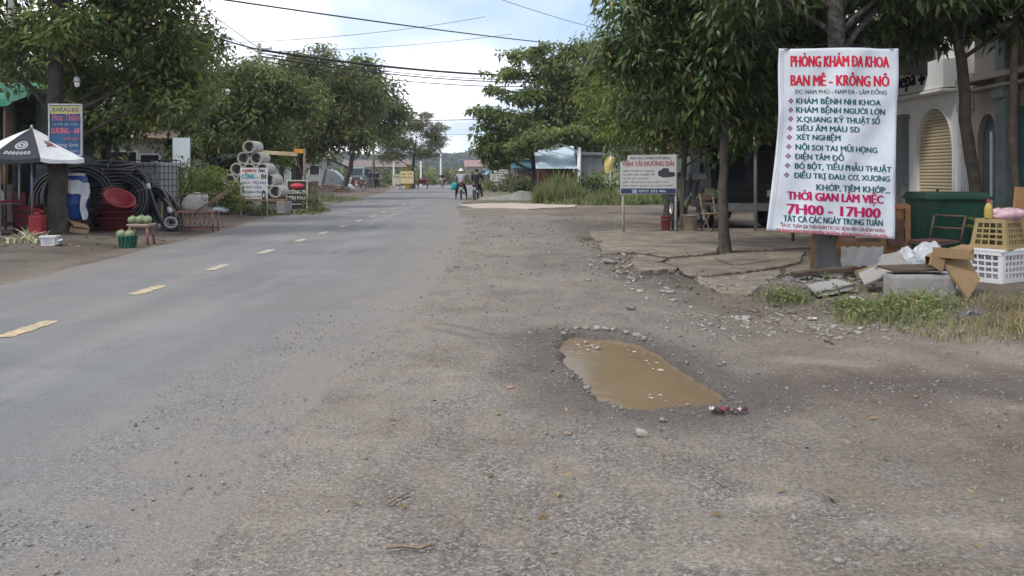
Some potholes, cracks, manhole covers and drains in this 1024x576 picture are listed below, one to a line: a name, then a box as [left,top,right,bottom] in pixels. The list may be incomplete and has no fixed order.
pothole [529,325,767,419]
crack [638,249,786,278]
